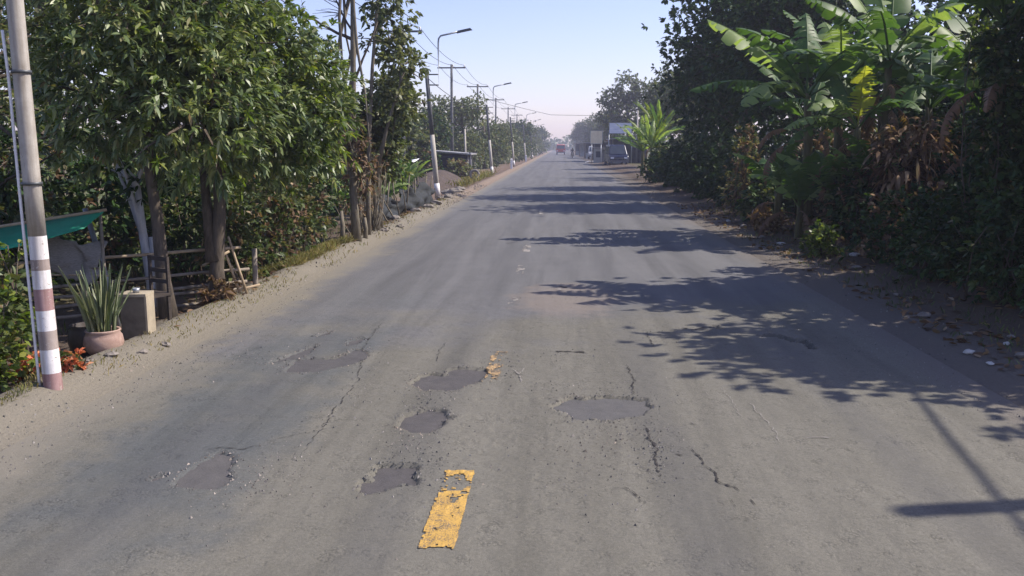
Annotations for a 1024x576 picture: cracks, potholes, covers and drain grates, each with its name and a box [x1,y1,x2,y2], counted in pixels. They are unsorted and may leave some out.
pothole [553,399,650,421]
pothole [399,411,447,433]
pothole [286,350,368,373]
crack [646,428,755,506]
pothole [360,468,418,495]
pothole [175,453,232,490]
pothole [412,370,487,391]
